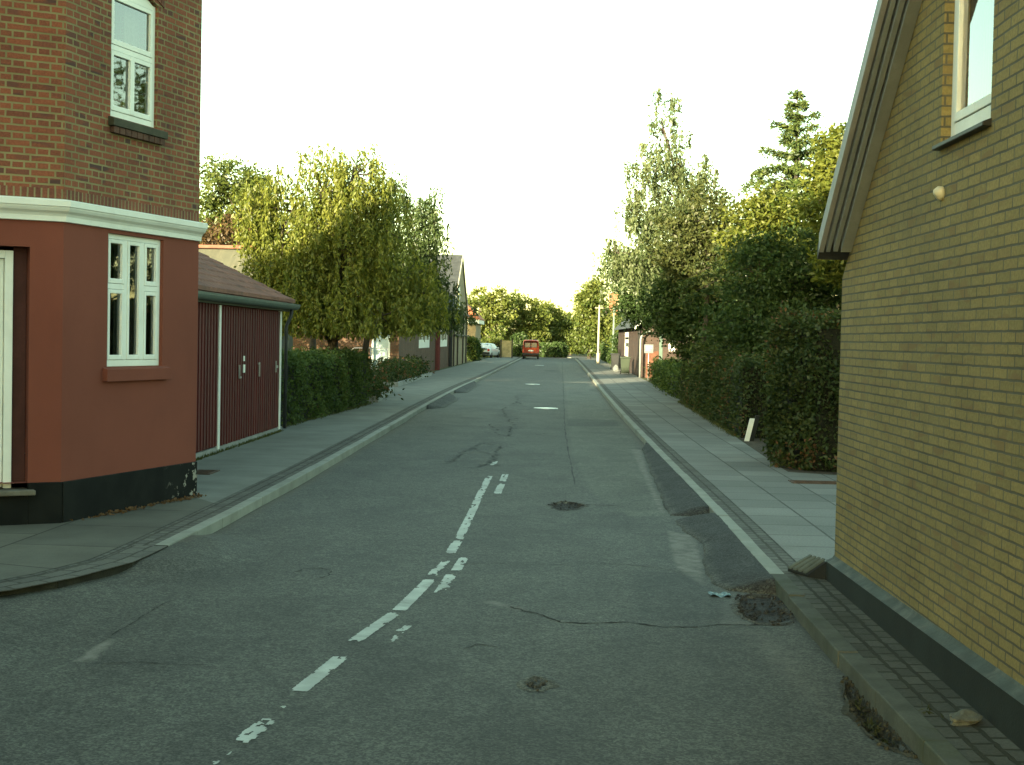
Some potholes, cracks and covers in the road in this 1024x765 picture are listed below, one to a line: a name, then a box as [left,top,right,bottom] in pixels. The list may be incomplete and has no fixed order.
pothole [729,592,796,626]
pothole [840,676,918,759]
crack [510,606,758,628]
crack [543,366,575,484]
crack [448,396,521,468]
pothole [546,500,589,511]
pothole [516,675,560,692]
